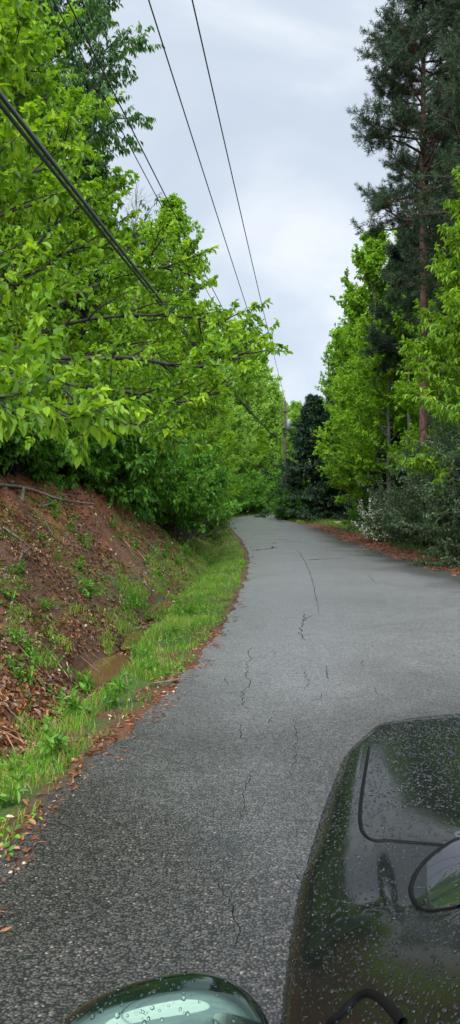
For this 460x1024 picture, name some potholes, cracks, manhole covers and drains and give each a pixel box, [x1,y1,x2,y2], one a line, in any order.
crack [216,879,241,946]
crack [252,521,341,654]
crack [193,647,385,794]
